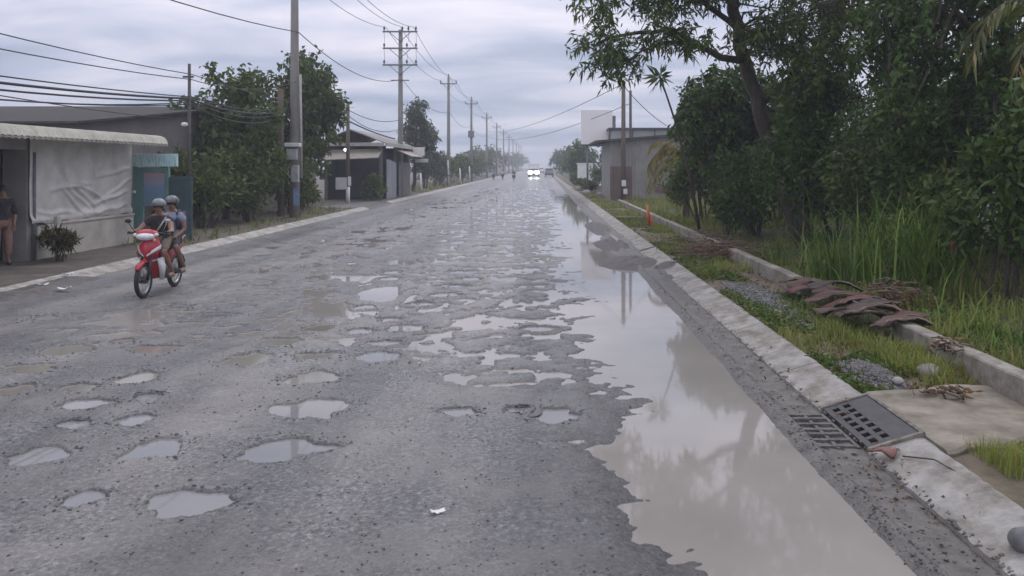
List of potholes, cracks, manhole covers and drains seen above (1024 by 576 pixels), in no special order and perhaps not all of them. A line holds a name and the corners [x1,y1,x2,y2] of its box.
pothole [224,433,354,466]
pothole [347,348,406,364]
pothole [427,404,488,419]
pothole [134,483,247,524]
pothole [47,416,98,431]
pothole [104,432,192,463]
pothole [0,442,80,470]
pothole [105,410,165,428]
pothole [46,395,124,412]
drain grate [820,392,926,452]
pothole [48,484,118,512]
pothole [260,395,359,421]
